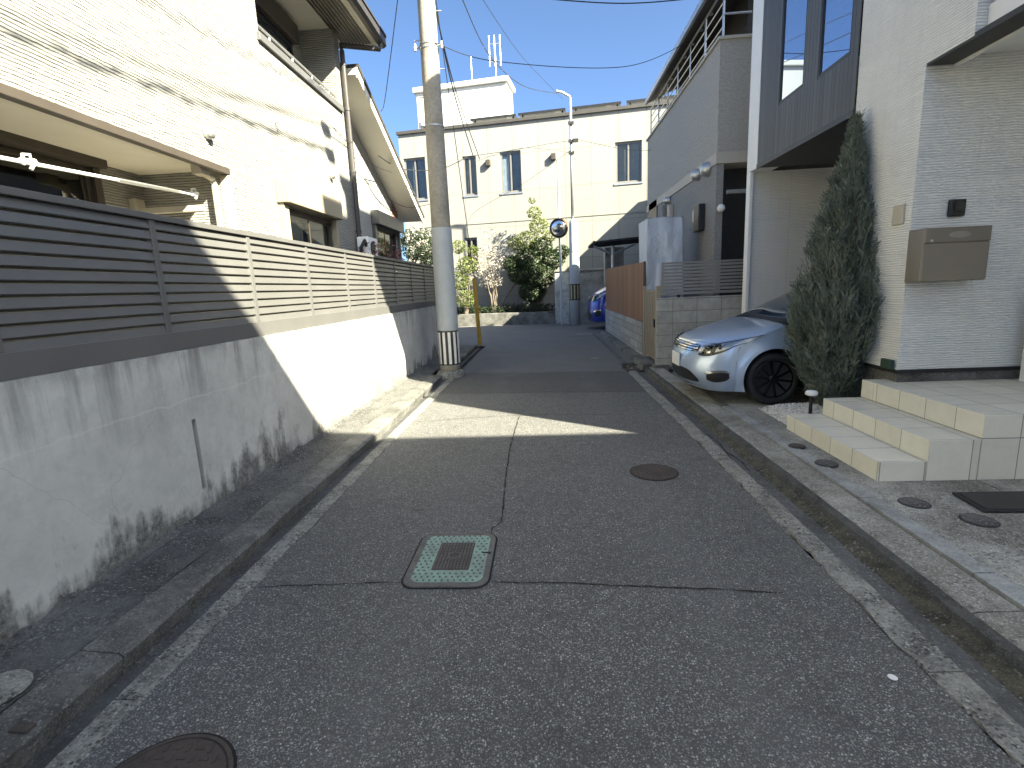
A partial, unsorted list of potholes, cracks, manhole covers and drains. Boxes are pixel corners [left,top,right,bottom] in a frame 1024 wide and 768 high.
crack [435,414,612,534]
manhole cover [401,533,498,589]
manhole cover [115,732,237,768]
manhole cover [630,464,679,481]
